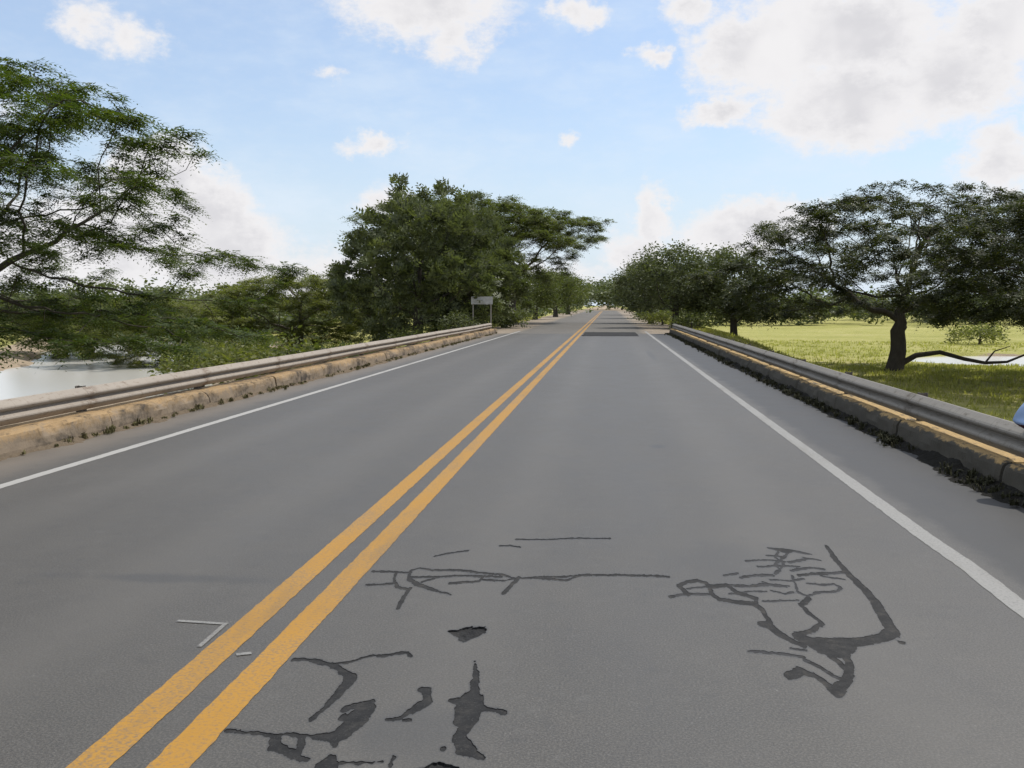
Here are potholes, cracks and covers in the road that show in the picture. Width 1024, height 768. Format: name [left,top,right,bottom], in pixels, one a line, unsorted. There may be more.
pothole [448,626,487,643]
crack [499,537,611,548]
